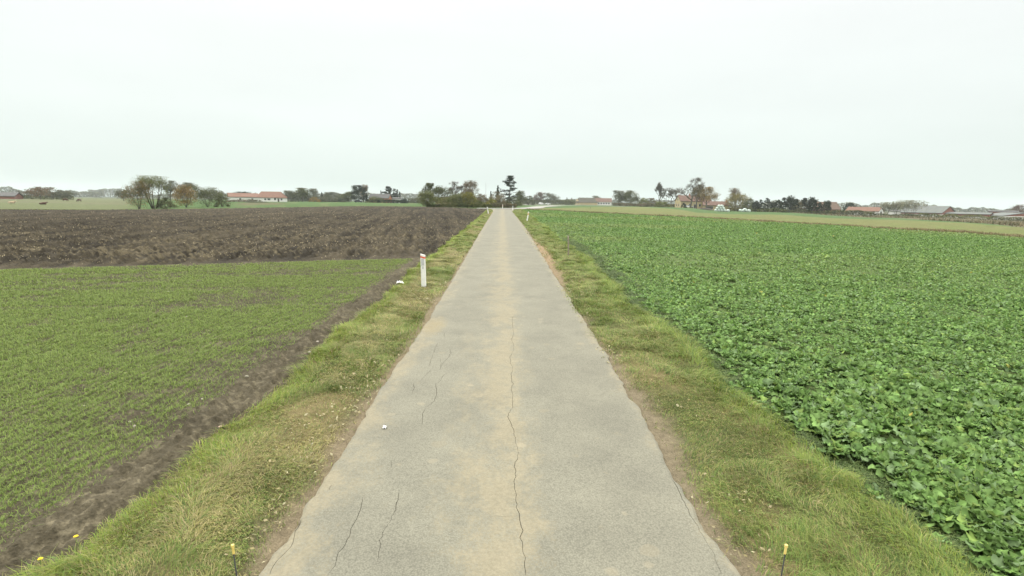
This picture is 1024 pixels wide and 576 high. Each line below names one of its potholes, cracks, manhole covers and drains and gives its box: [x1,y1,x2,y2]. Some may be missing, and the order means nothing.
crack [508,323,526,575]
